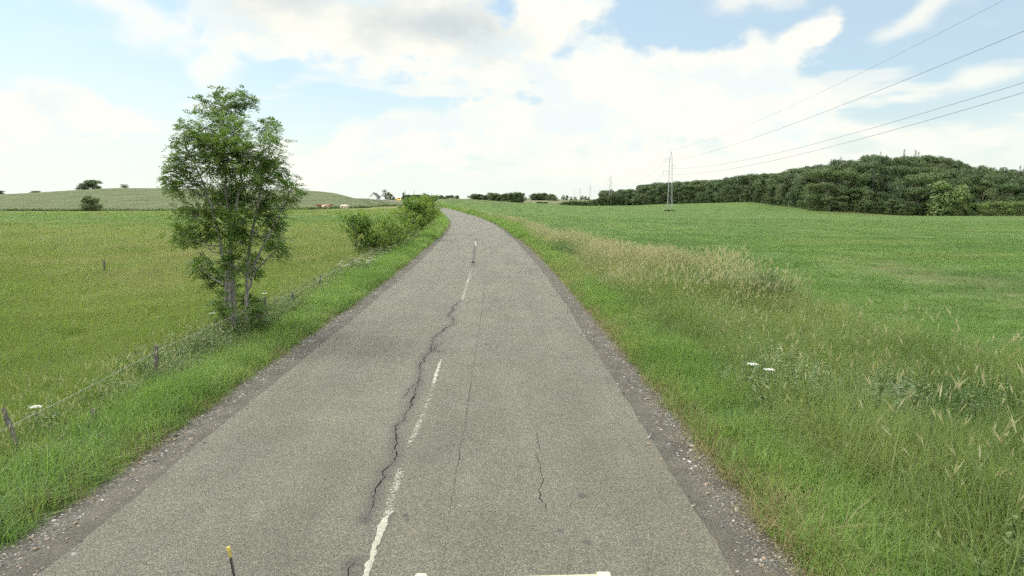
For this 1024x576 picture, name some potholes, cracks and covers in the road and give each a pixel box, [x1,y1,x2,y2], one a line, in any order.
crack [534,428,547,511]
crack [437,239,486,562]
crack [368,304,456,516]
